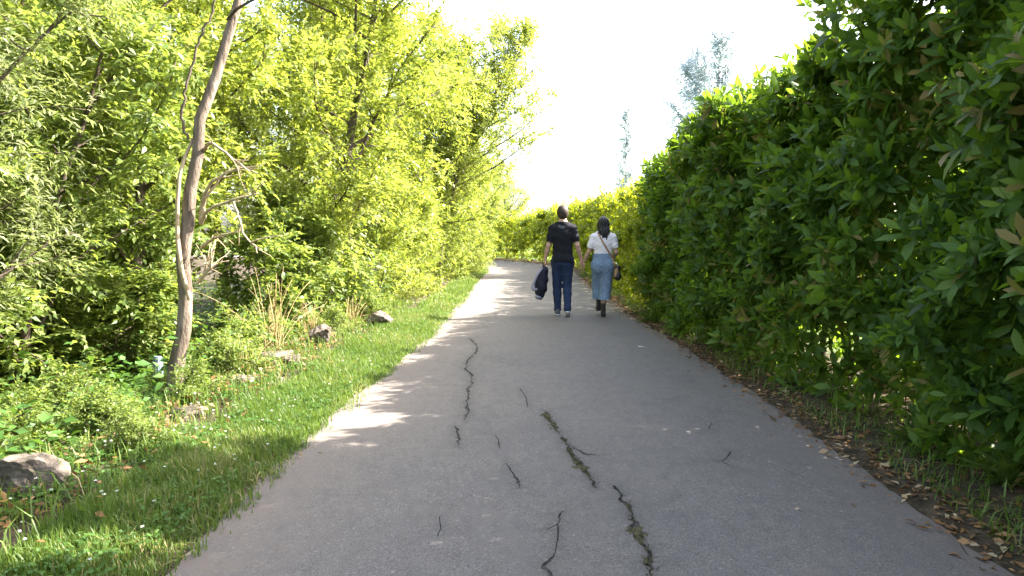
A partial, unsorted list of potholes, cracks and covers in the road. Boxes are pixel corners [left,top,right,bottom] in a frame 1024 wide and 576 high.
crack [455,339,478,445]
crack [520,389,659,576]
